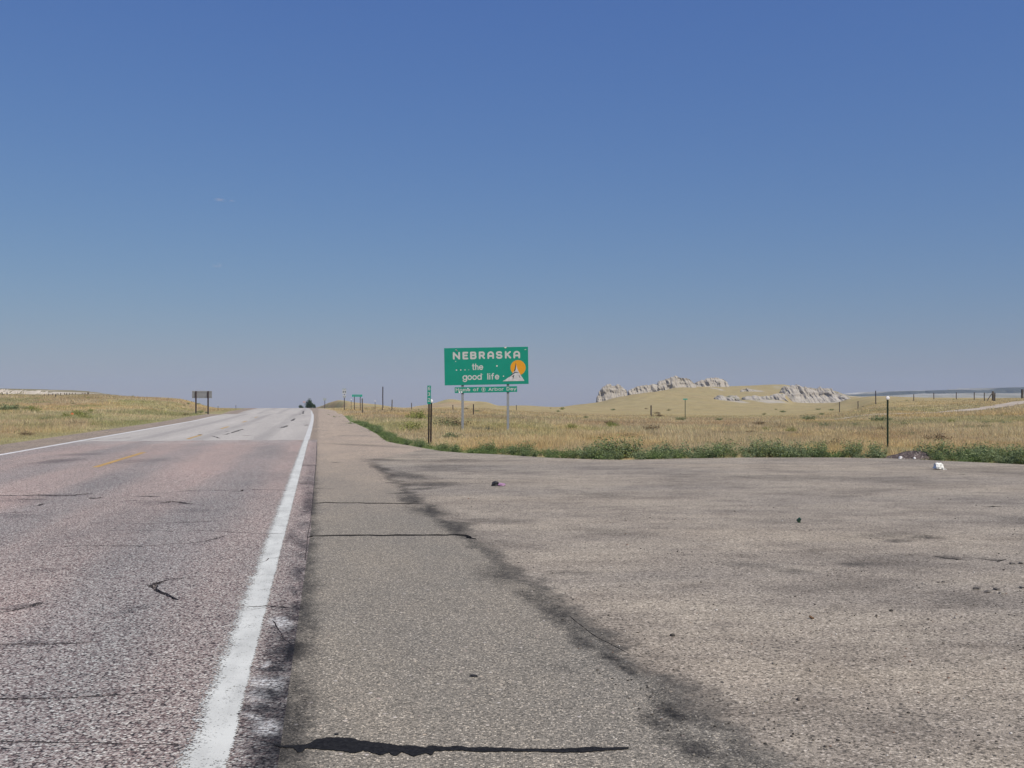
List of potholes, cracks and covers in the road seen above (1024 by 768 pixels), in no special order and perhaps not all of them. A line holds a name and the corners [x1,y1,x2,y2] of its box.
crack [148,577,185,600]
crack [0,494,103,514]
crack [121,489,259,504]
crack [3,602,42,612]
